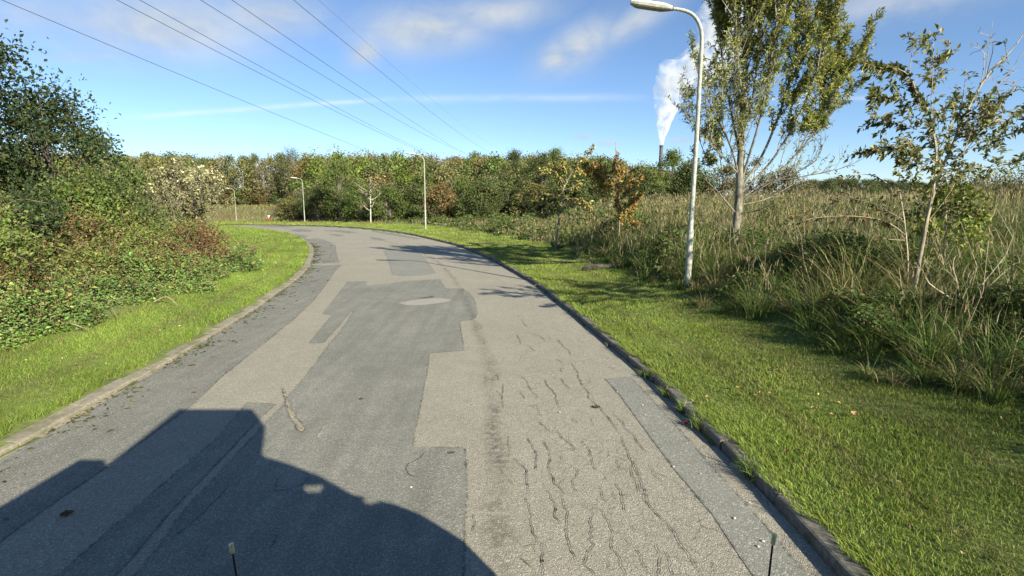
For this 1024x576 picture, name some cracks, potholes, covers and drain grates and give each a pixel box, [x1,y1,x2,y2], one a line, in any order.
crack [266,388,305,452]
crack [501,319,703,575]
